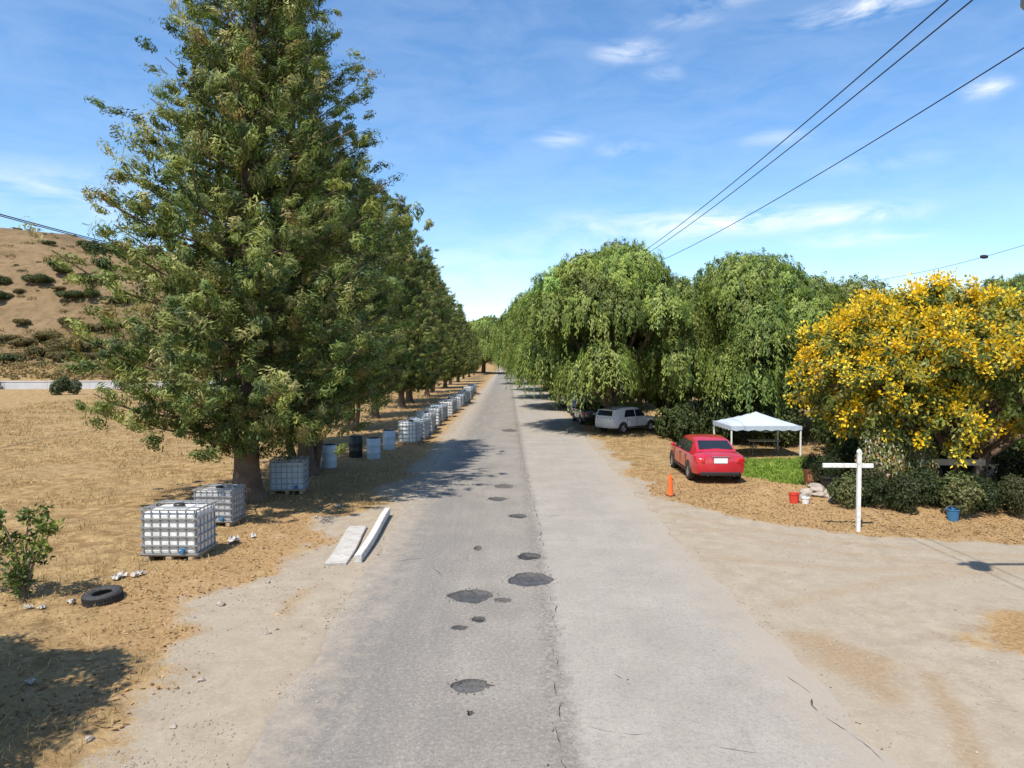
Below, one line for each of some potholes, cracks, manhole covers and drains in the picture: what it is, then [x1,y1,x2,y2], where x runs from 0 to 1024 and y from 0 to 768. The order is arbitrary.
pothole [446,588,500,605]
crack [788,677,880,758]
crack [516,424,573,768]
pothole [447,678,496,695]
pothole [517,551,541,560]
pothole [502,572,558,588]
